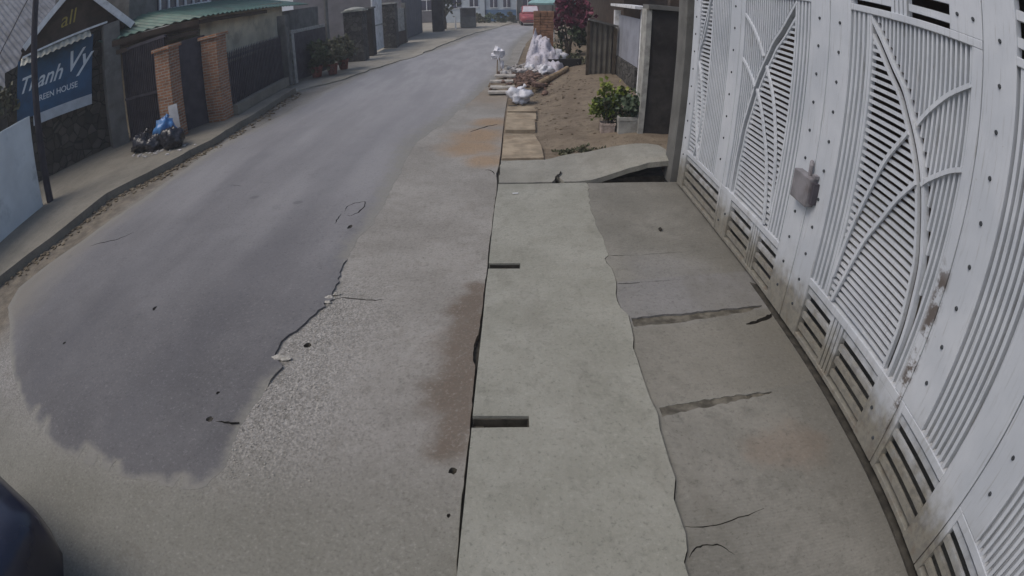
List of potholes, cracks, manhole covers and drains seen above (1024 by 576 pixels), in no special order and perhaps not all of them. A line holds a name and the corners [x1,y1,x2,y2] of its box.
crack [616,287,764,564]
crack [746,314,772,325]
